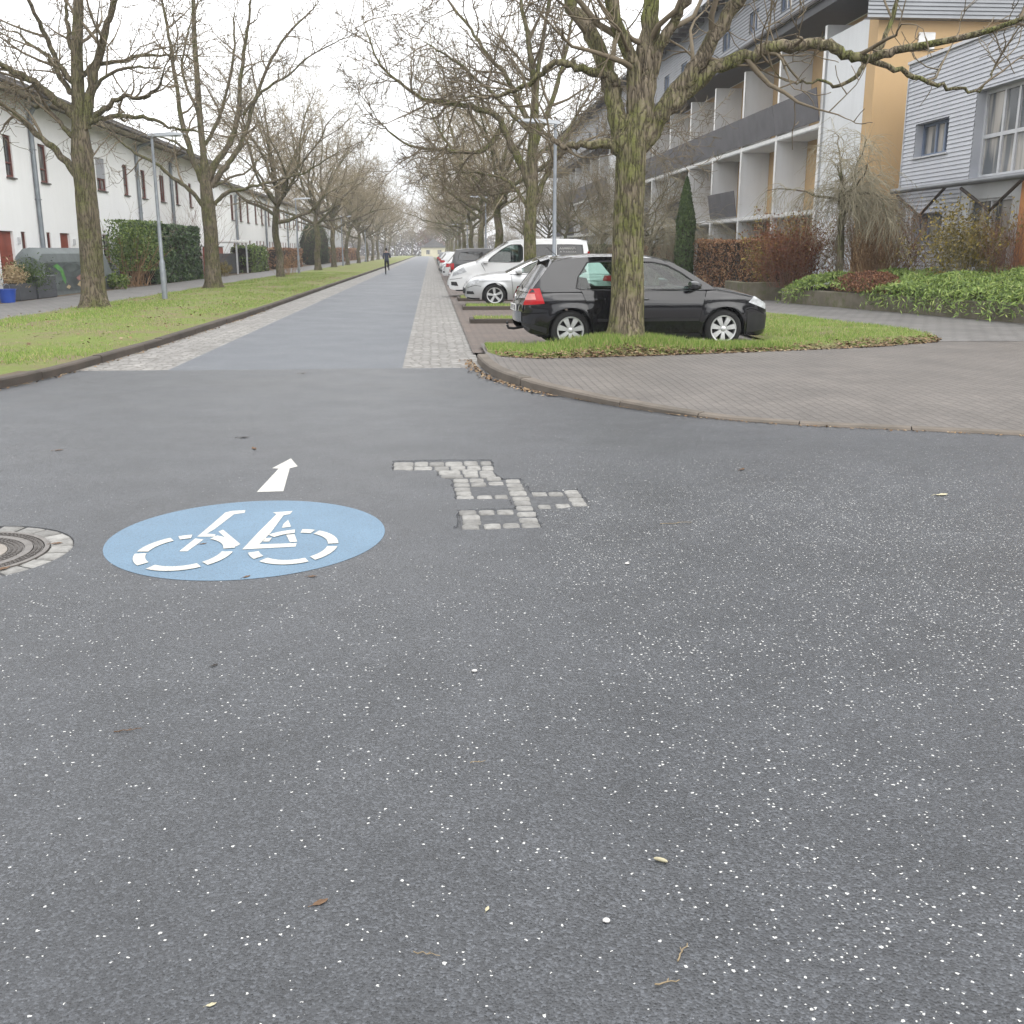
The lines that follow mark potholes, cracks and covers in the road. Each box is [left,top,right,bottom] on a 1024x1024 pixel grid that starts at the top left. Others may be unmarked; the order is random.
manhole cover [0,526,74,576]
